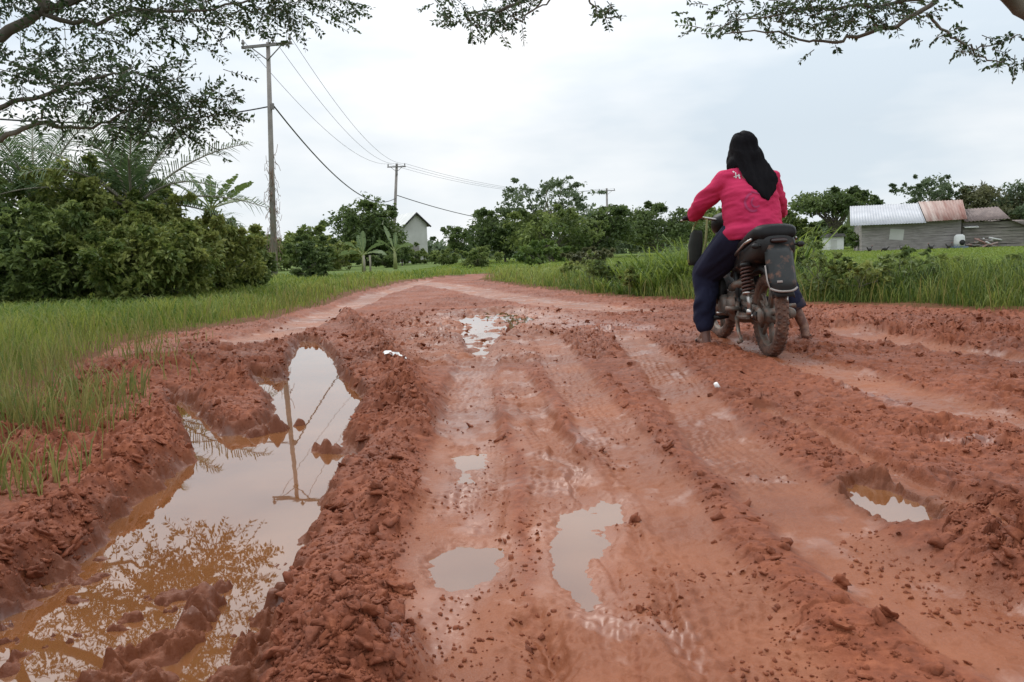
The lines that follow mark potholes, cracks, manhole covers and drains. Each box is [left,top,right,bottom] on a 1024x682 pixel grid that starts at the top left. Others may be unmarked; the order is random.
pothole [448,306,549,362]
pothole [828,466,952,524]
pothole [0,333,371,682]
pothole [416,538,518,595]
pothole [537,495,634,615]
